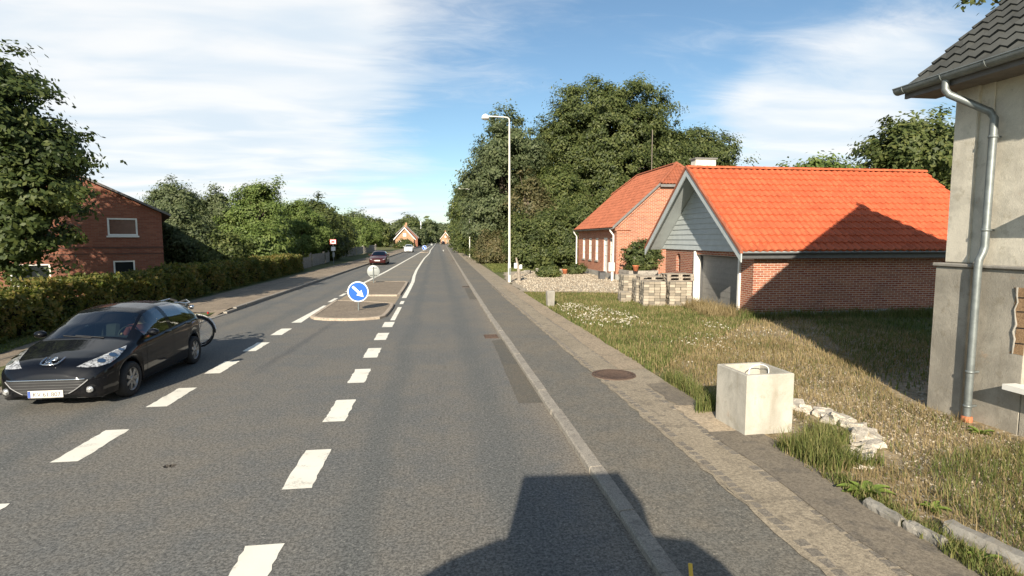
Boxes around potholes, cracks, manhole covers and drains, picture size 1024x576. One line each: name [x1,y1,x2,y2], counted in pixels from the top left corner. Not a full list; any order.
manhole cover [592,369,636,380]
